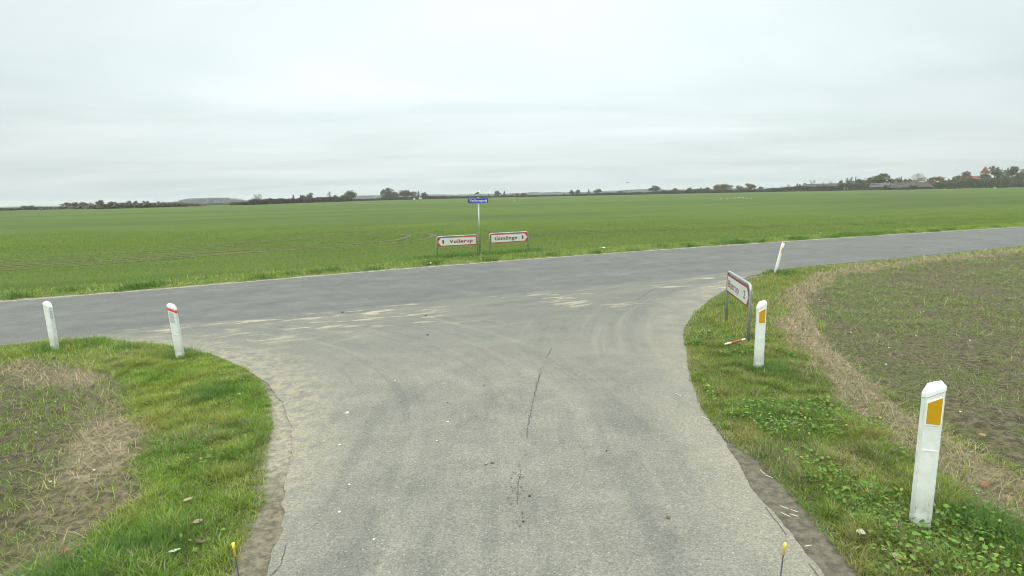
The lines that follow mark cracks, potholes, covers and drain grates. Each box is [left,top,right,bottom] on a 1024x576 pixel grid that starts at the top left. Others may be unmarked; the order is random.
crack [508,348,552,529]
